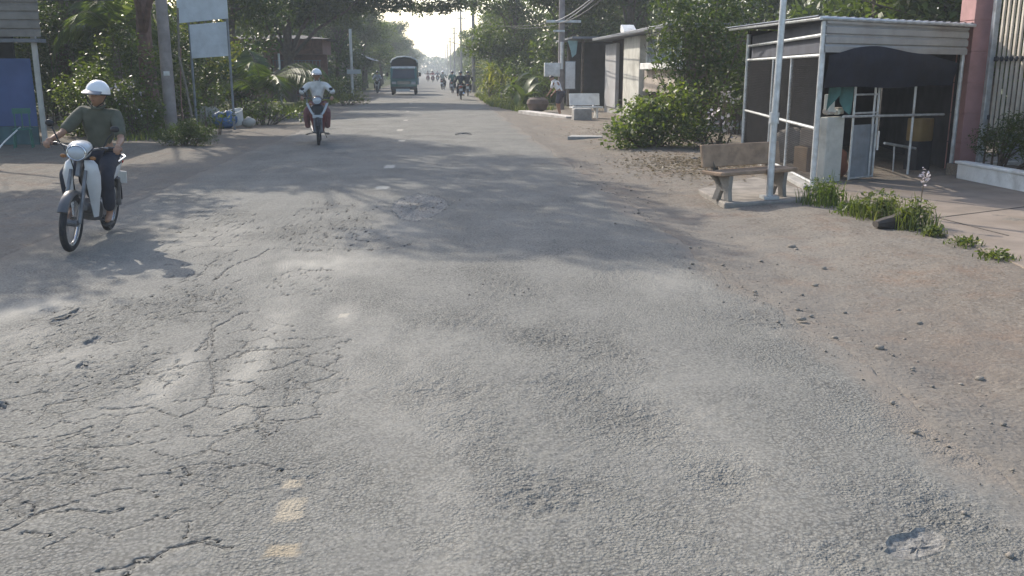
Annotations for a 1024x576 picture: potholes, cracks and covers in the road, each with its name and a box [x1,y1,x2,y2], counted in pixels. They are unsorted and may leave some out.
pothole [877,526,953,562]
crack [0,202,410,576]
